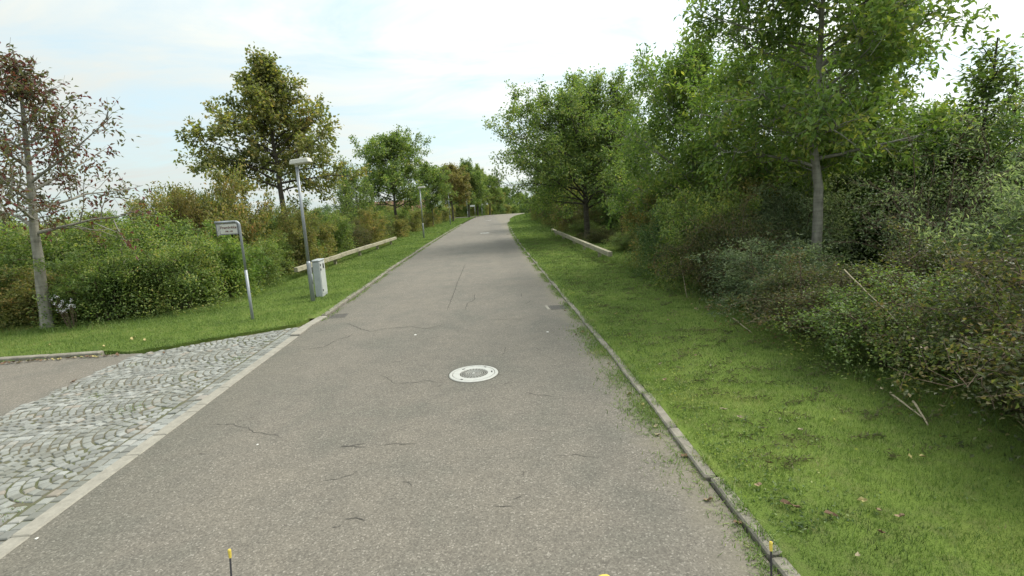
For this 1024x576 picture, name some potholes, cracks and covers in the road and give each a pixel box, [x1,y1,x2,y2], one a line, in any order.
manhole cover [448,365,500,383]
